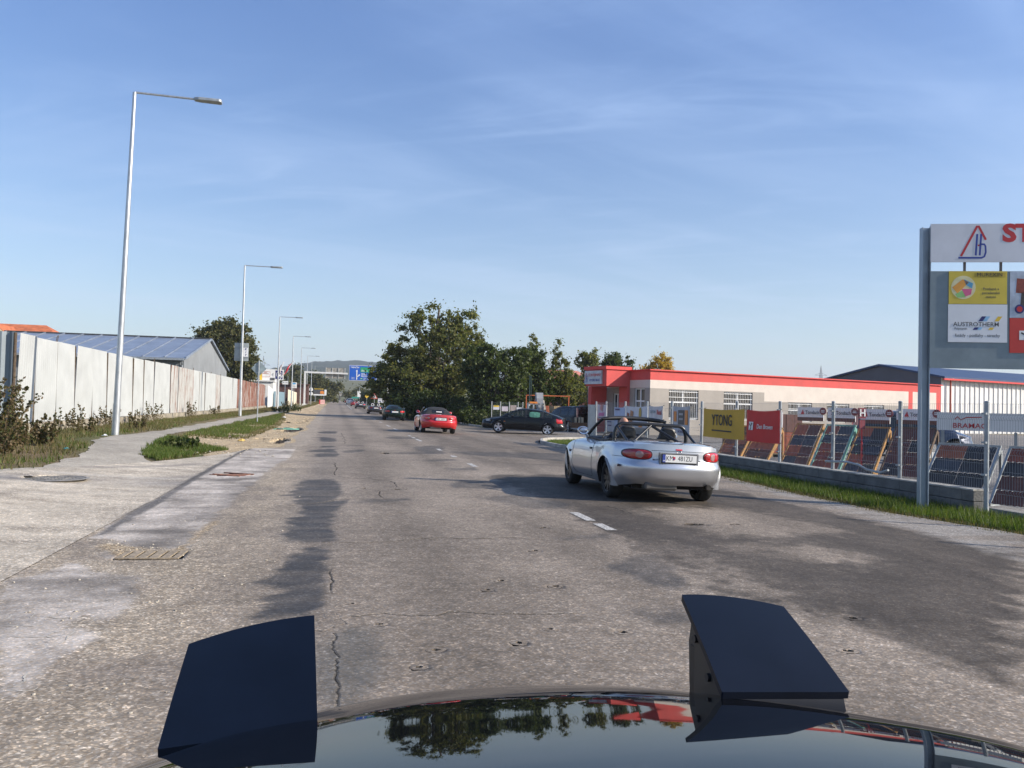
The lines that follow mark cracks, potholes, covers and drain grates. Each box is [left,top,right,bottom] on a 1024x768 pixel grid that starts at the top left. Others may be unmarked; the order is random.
crack [329,462,491,516]
crack [315,569,587,711]
drain grate [114,550,188,560]
